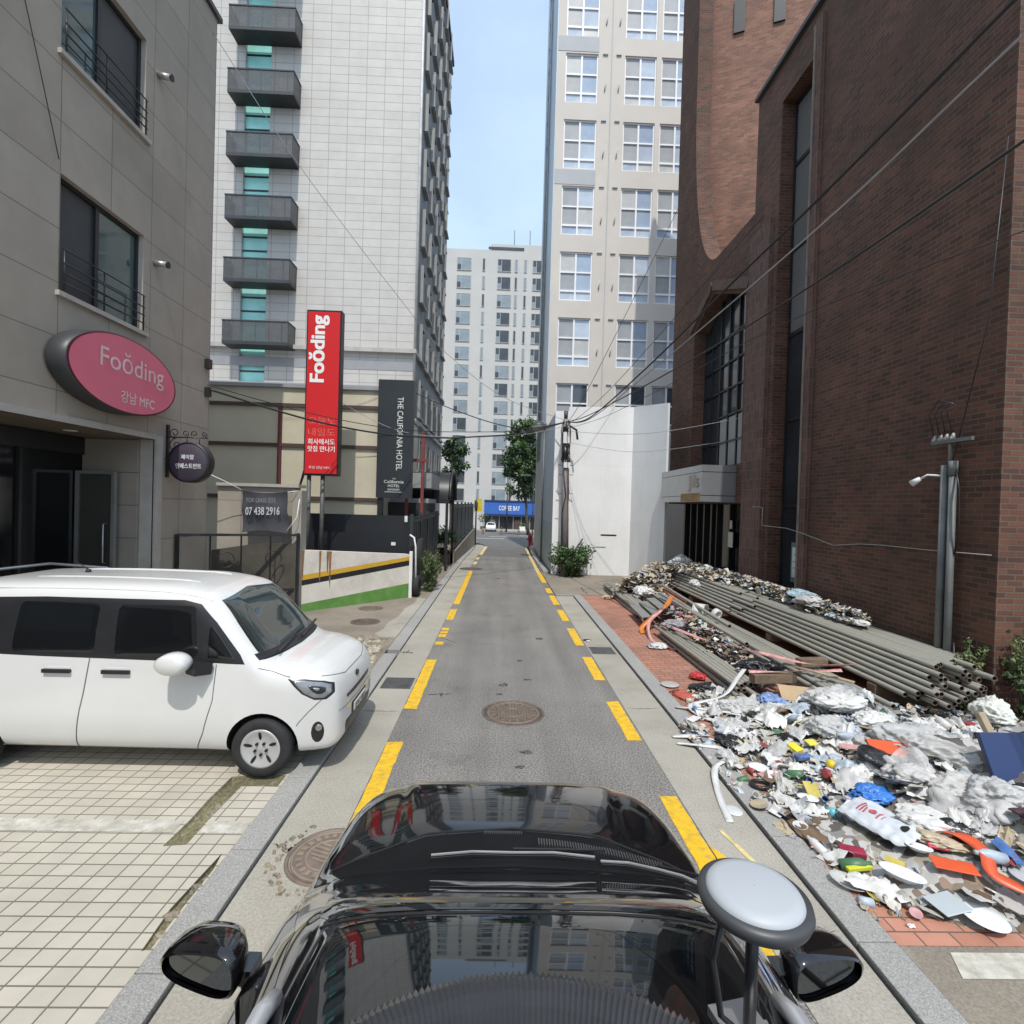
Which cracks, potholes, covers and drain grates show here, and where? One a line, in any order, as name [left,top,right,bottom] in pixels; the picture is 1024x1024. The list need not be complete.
manhole cover [482,701,544,726]
manhole cover [284,828,346,887]
